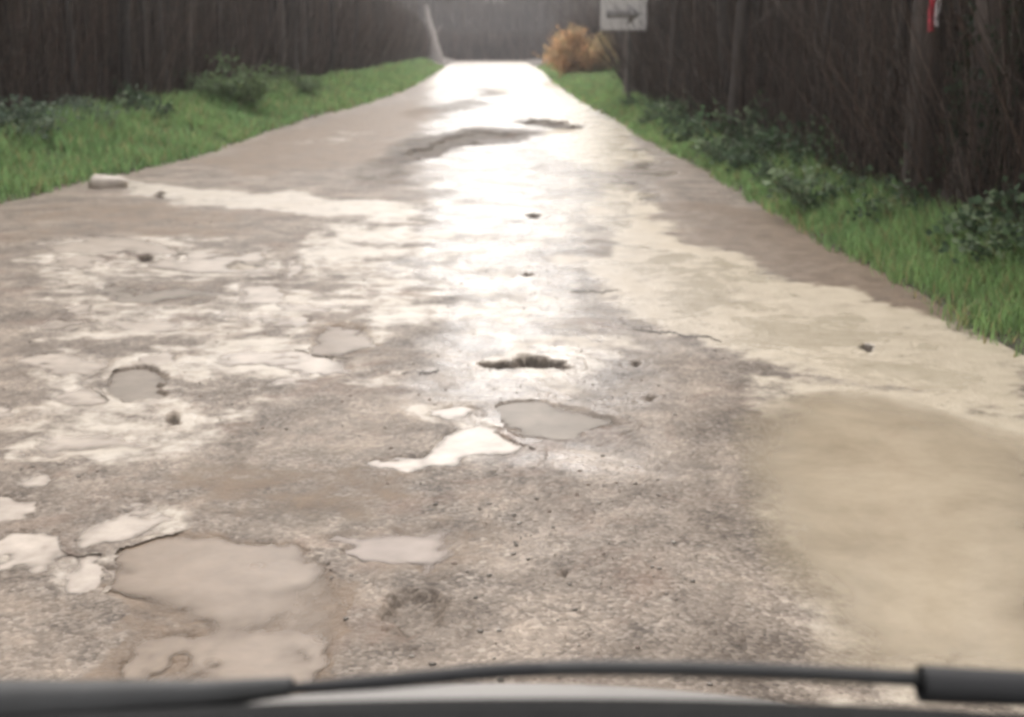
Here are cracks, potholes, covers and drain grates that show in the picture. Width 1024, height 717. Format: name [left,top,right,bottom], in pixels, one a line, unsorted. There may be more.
pothole [43,516,393,695]
pothole [98,360,187,407]
pothole [288,316,400,358]
pothole [459,351,589,376]
pothole [386,129,549,162]
crack [632,328,722,342]
pothole [485,391,644,451]
pothole [499,117,599,131]
